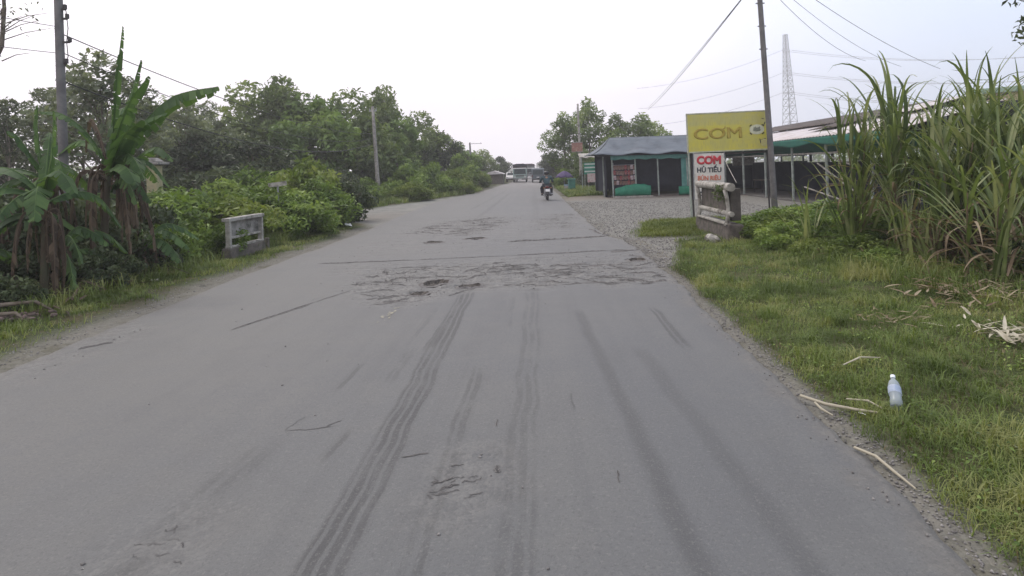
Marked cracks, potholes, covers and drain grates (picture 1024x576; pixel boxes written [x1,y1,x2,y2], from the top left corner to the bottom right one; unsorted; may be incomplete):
crack [232,214,667,330]
crack [427,464,501,498]
pothole [418,278,453,288]
